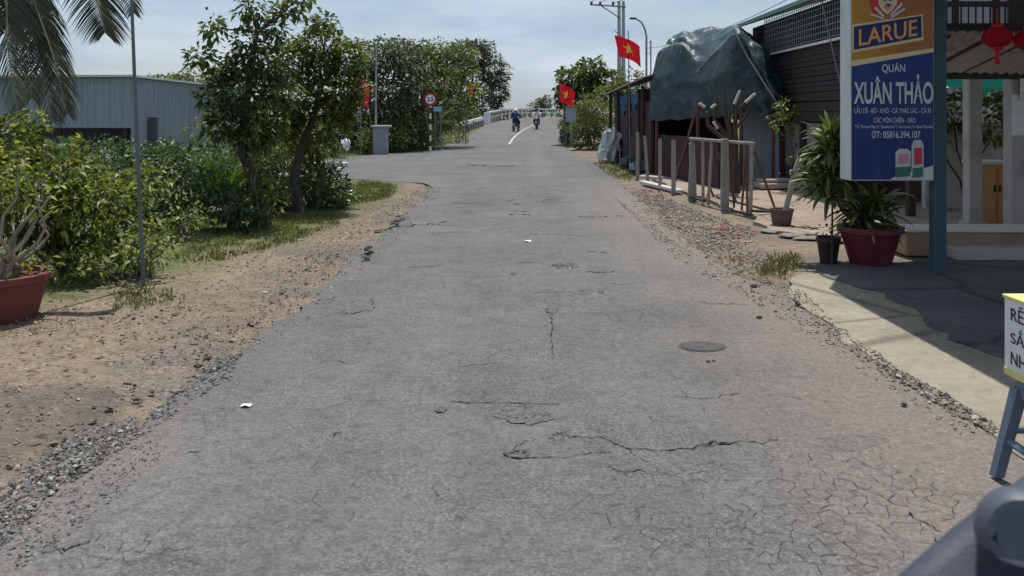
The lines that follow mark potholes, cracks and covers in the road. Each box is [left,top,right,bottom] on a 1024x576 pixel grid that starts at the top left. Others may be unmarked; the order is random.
crack [529,264,644,351]
manhole cover [678,341,727,352]
pothole [502,449,531,458]
pothole [494,404,555,425]
crack [361,206,450,262]
crack [514,436,778,556]
crack [724,442,967,574]
